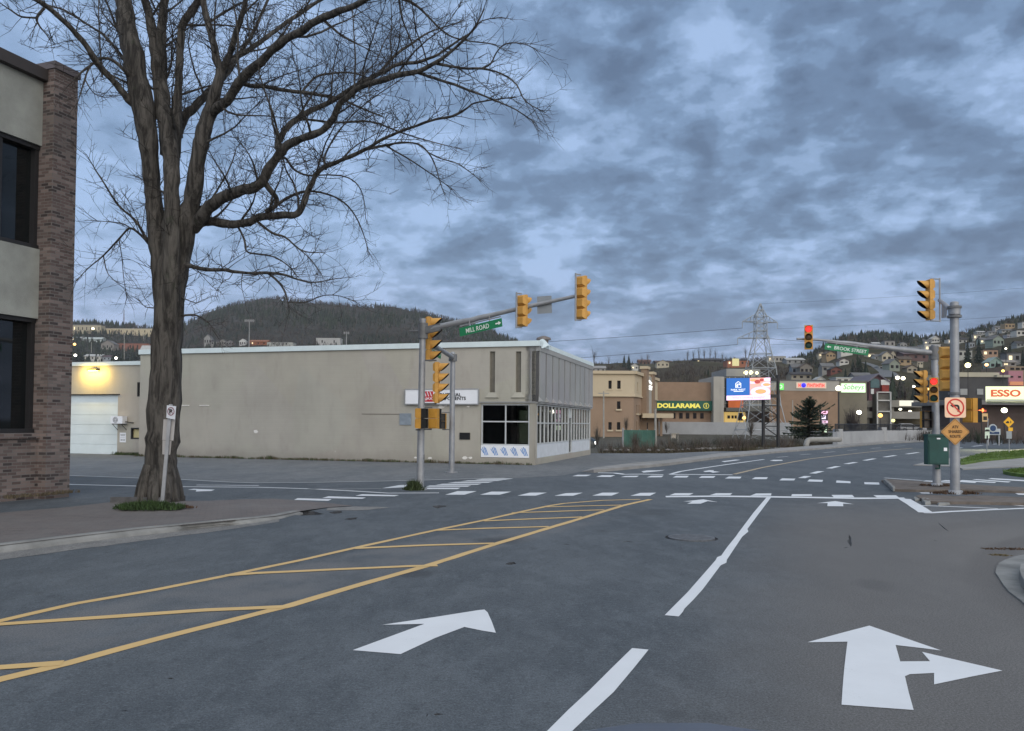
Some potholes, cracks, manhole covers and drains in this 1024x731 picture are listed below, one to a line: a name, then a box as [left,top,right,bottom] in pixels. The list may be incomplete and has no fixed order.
manhole cover [665,534,718,542]
